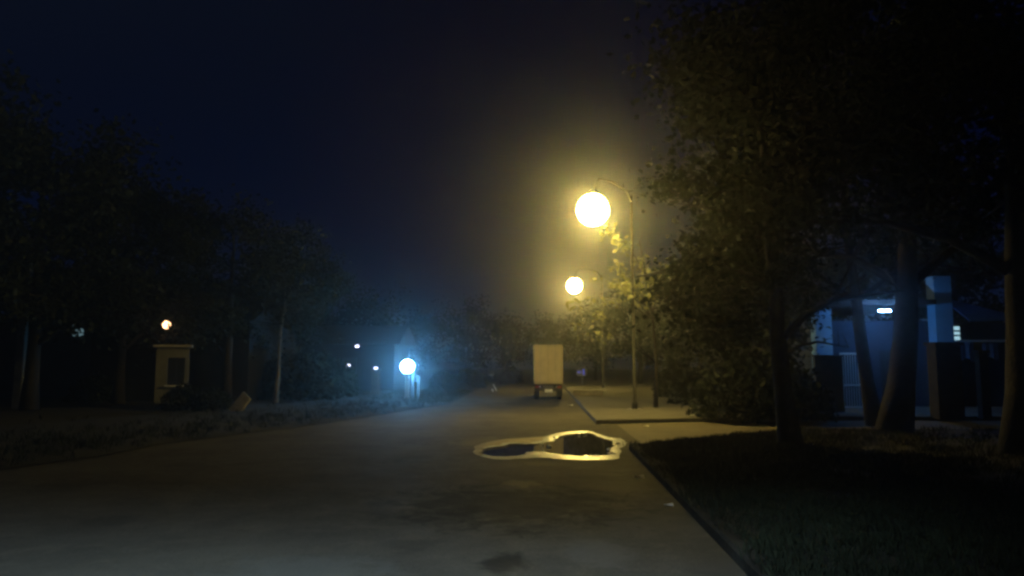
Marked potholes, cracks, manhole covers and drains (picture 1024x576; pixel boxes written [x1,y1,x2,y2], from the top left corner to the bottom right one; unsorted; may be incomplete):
pothole [473,431,627,460]
